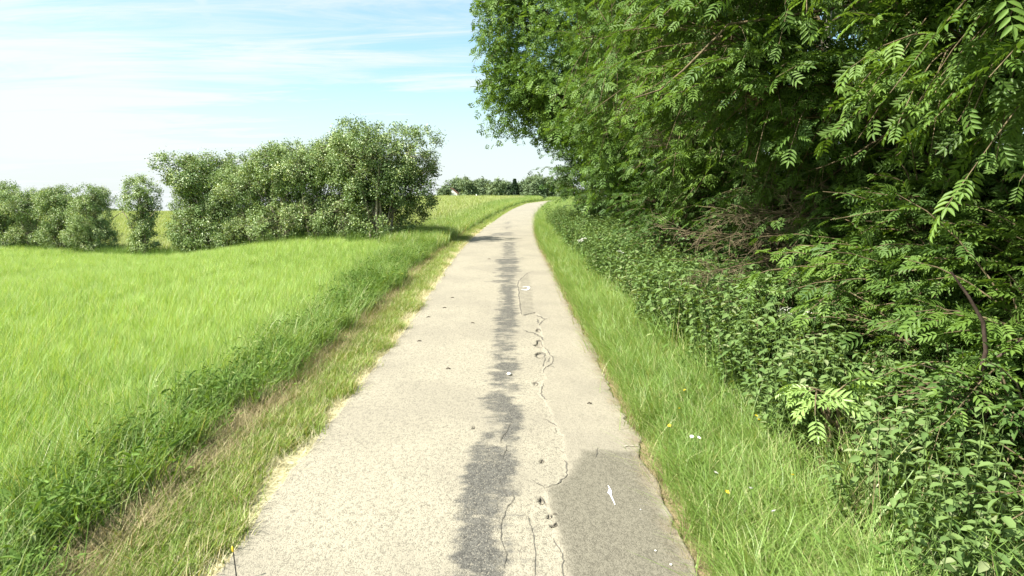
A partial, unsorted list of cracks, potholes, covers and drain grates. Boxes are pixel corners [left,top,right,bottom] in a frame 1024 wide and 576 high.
crack [499,419,568,565]
crack [524,312,554,400]
